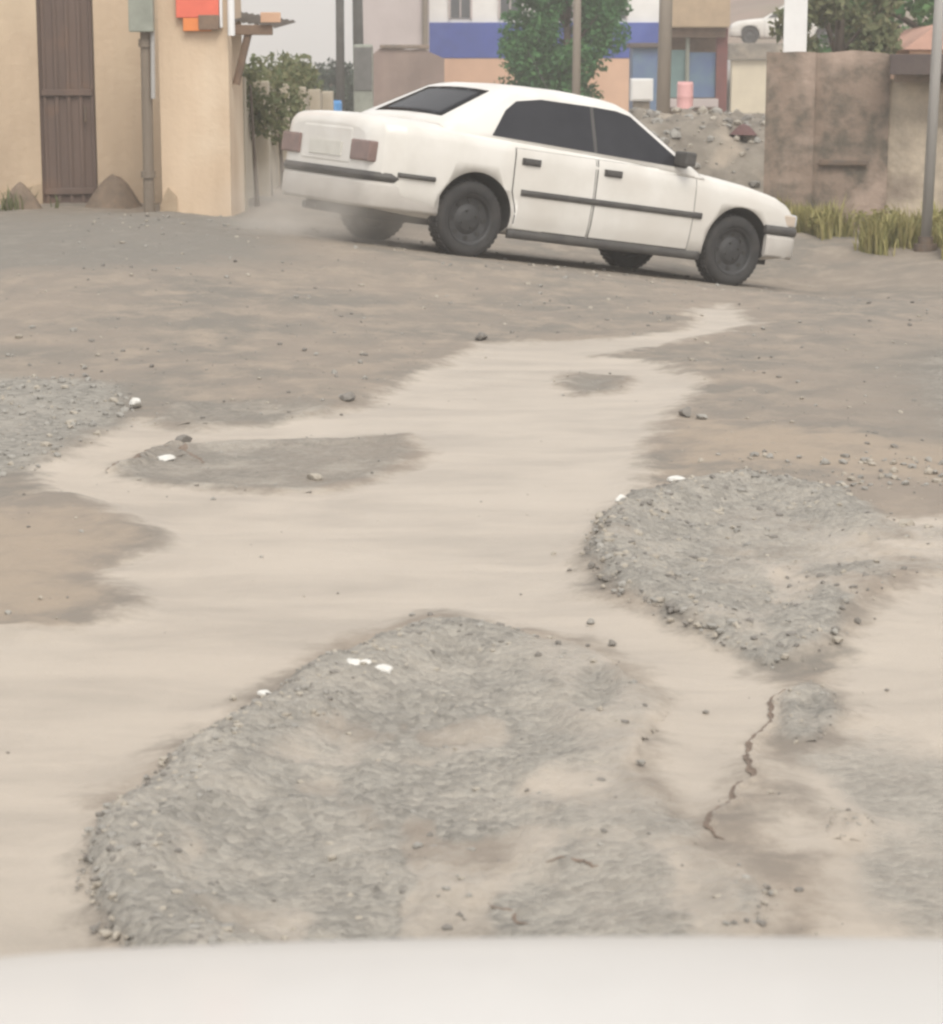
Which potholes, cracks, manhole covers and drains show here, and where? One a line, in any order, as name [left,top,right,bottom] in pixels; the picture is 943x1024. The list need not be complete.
crack [703,689,786,839]
pothole [553,372,632,394]
pothole [108,432,420,495]
